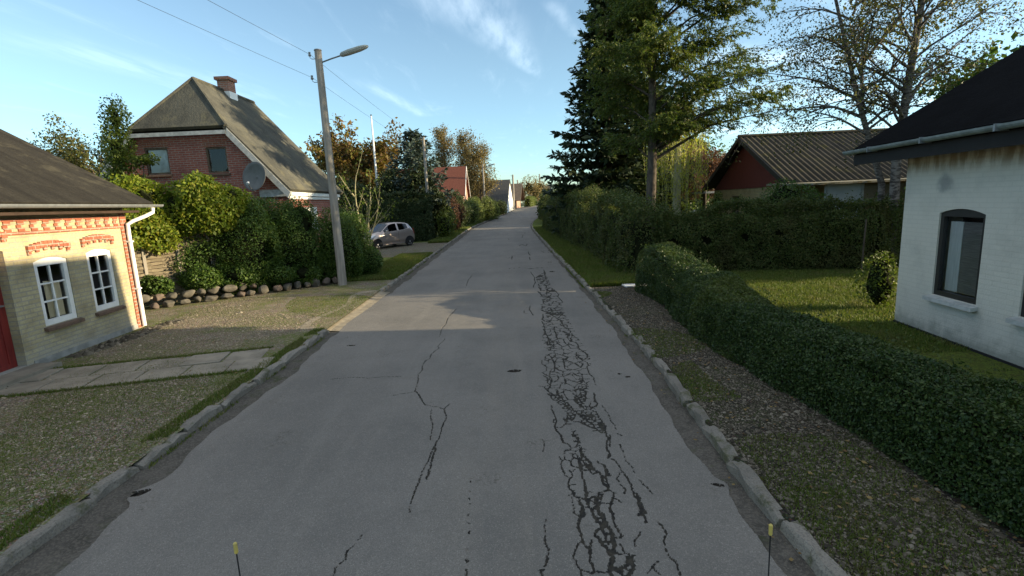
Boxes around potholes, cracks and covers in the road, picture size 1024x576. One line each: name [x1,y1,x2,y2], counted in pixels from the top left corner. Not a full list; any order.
crack [333,535,362,576]
crack [509,235,682,576]
crack [334,309,456,513]
